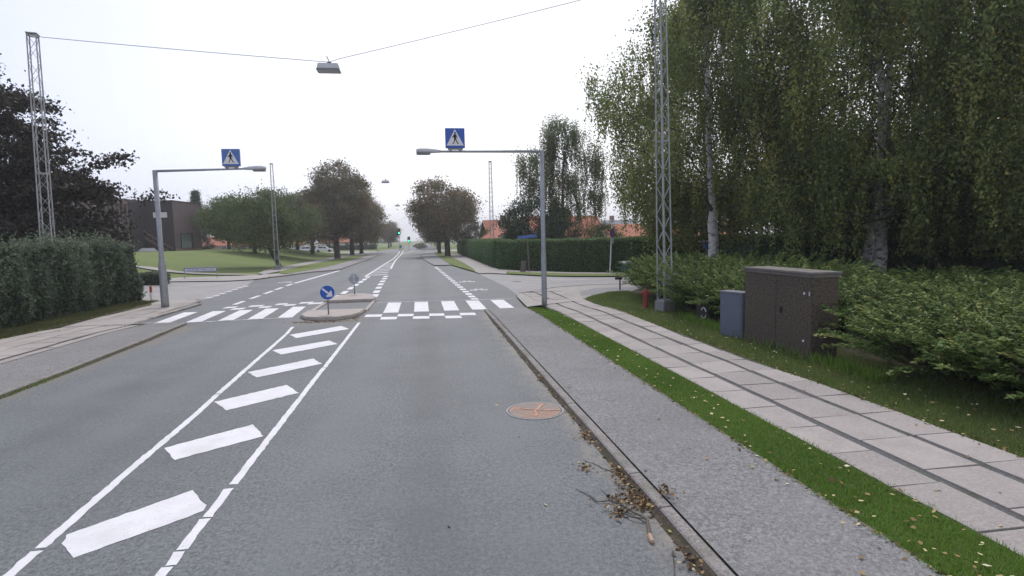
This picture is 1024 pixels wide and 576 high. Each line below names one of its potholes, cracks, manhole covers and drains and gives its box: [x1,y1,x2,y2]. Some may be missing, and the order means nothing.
manhole cover [506,402,564,420]
